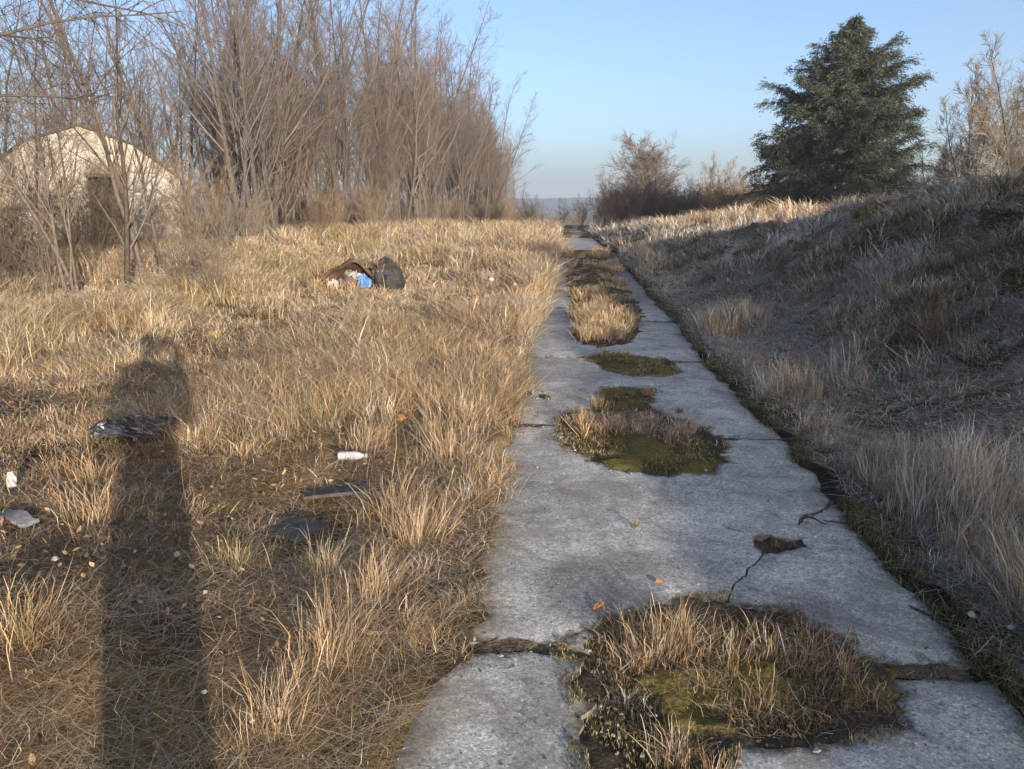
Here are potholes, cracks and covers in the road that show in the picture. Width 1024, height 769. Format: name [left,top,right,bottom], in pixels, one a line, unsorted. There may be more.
pothole [572,596,908,769]
pothole [557,387,729,477]
pothole [589,354,680,376]
crack [798,500,845,525]
crack [725,555,763,603]
